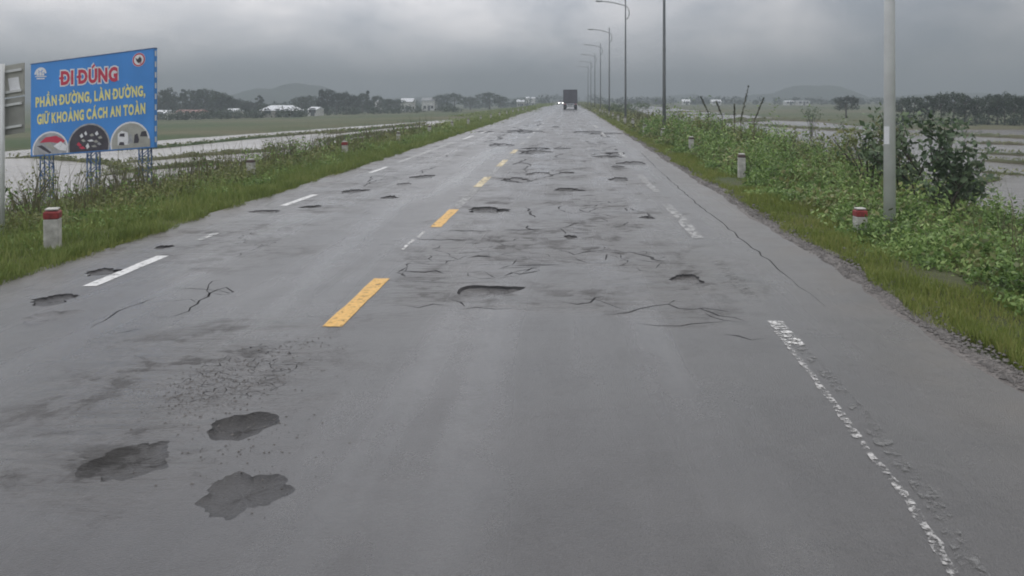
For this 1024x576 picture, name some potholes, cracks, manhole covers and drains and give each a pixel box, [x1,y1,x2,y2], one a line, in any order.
crack [409,300,510,310]
crack [558,200,672,271]
crack [92,298,153,334]
pothole [84,268,123,276]
pothole [30,293,80,307]
crack [399,230,549,282]
pothole [457,285,525,297]
crack [160,280,234,318]
pothole [669,274,705,285]
